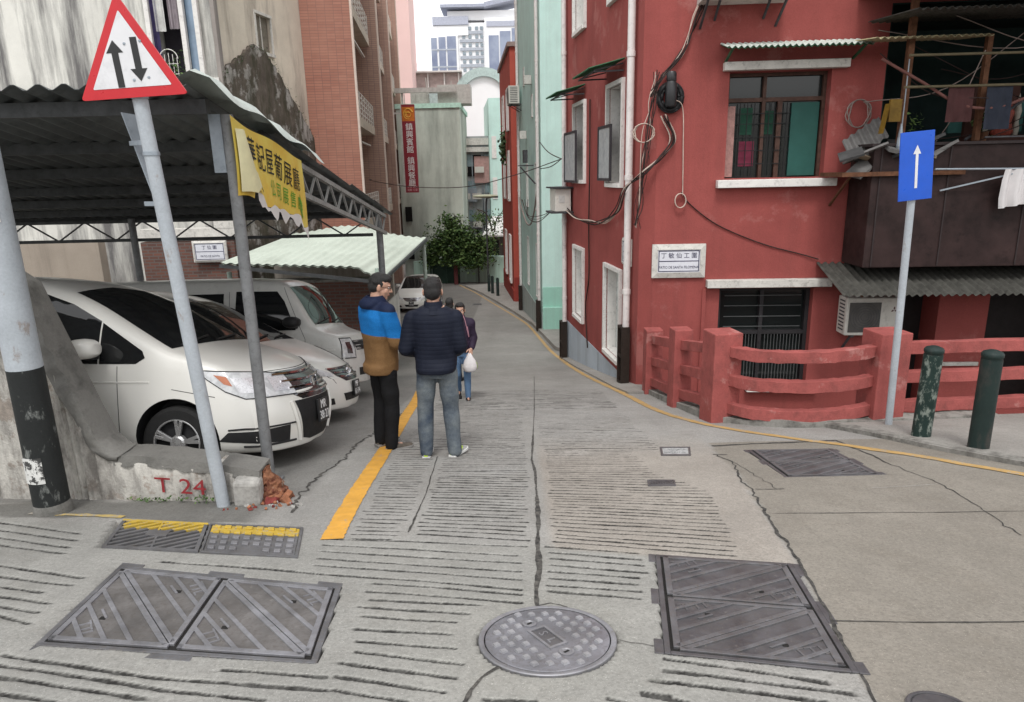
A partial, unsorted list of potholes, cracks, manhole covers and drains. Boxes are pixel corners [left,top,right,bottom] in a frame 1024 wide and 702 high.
manhole cover [648,554,871,675]
utility cover [905,691,963,702]
crack [714,454,877,702]
utility cover [660,447,691,456]
drain grate [101,519,209,554]
manhole cover [30,563,343,664]
manhole cover [478,606,617,678]
manhole cover [743,448,886,477]
